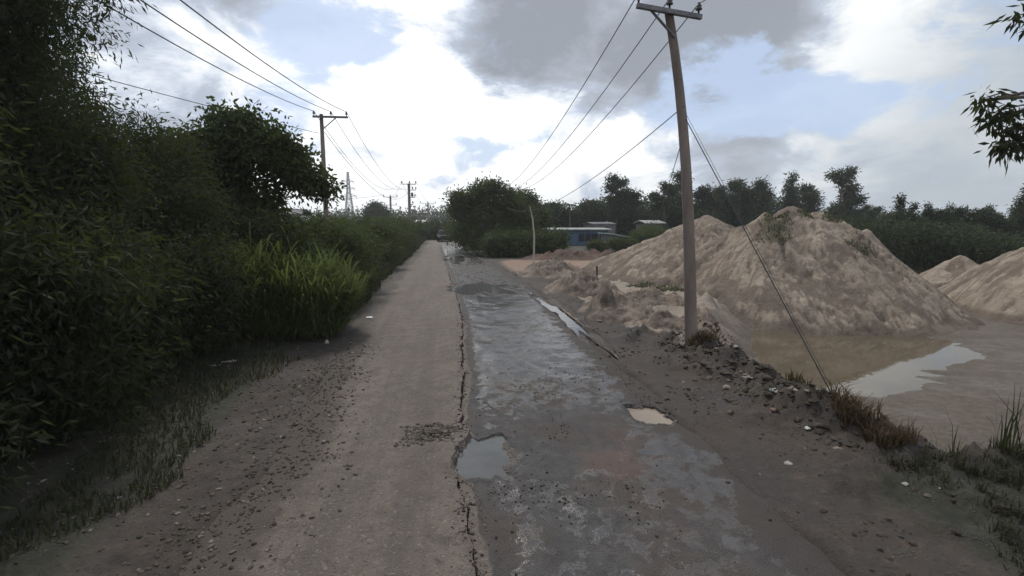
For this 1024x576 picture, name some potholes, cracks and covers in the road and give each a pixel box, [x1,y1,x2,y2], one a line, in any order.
pothole [620,403,678,426]
pothole [402,424,458,446]
crack [413,269,494,576]
pothole [446,430,529,484]
pothole [524,290,620,360]
